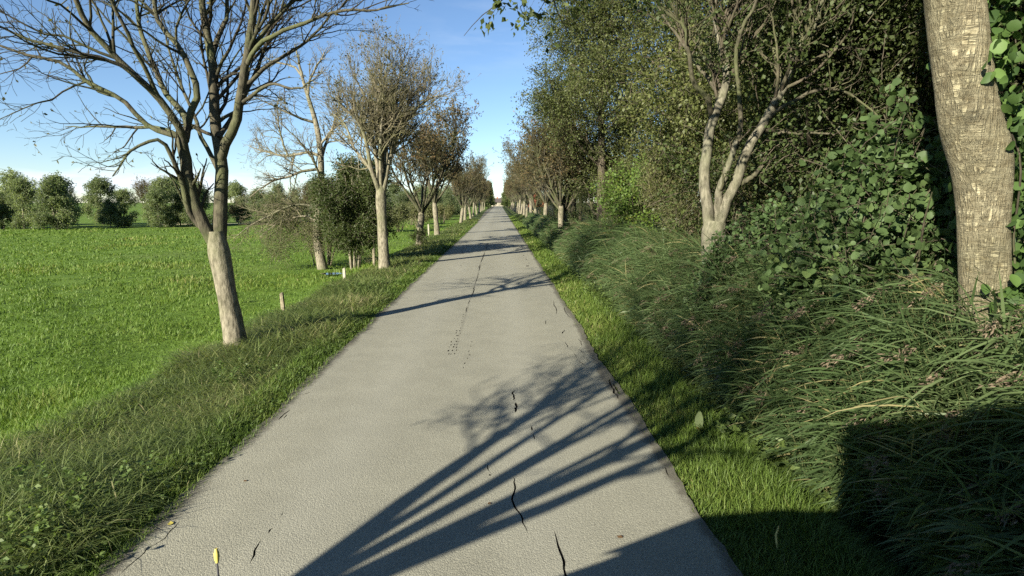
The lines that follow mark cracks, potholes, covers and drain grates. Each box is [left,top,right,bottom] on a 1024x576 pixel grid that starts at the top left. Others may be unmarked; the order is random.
crack [511,477,527,531]
crack [554,532,567,576]
